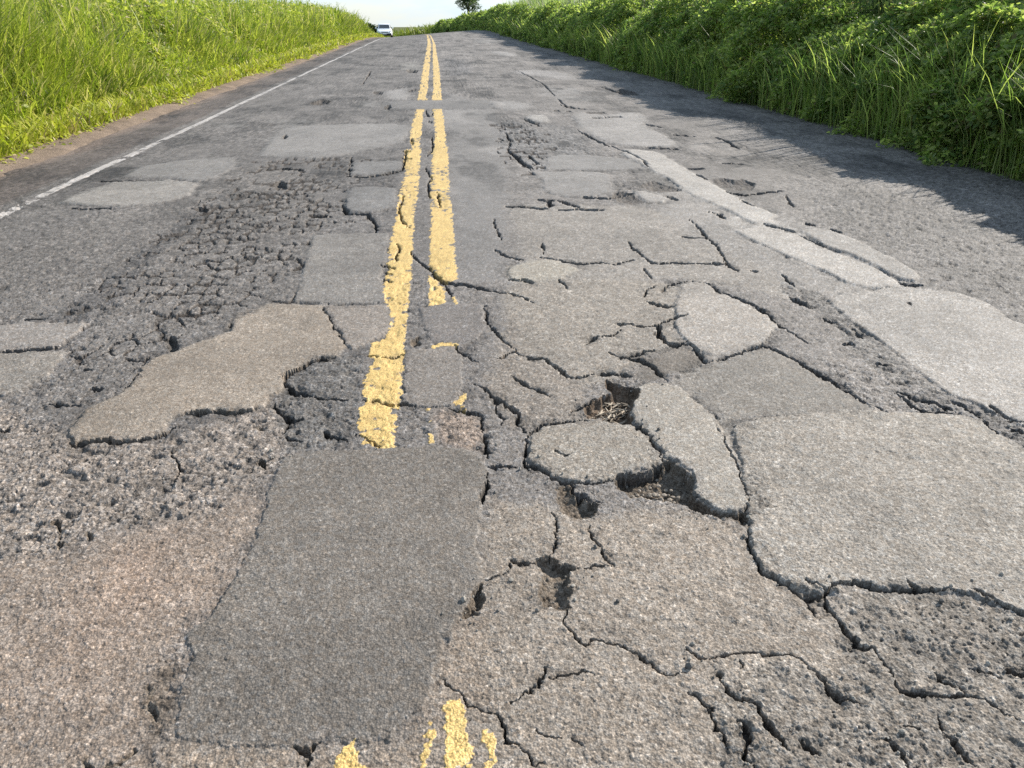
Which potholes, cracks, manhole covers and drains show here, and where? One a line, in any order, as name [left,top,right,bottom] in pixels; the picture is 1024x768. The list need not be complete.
pothole [583,380,642,425]
